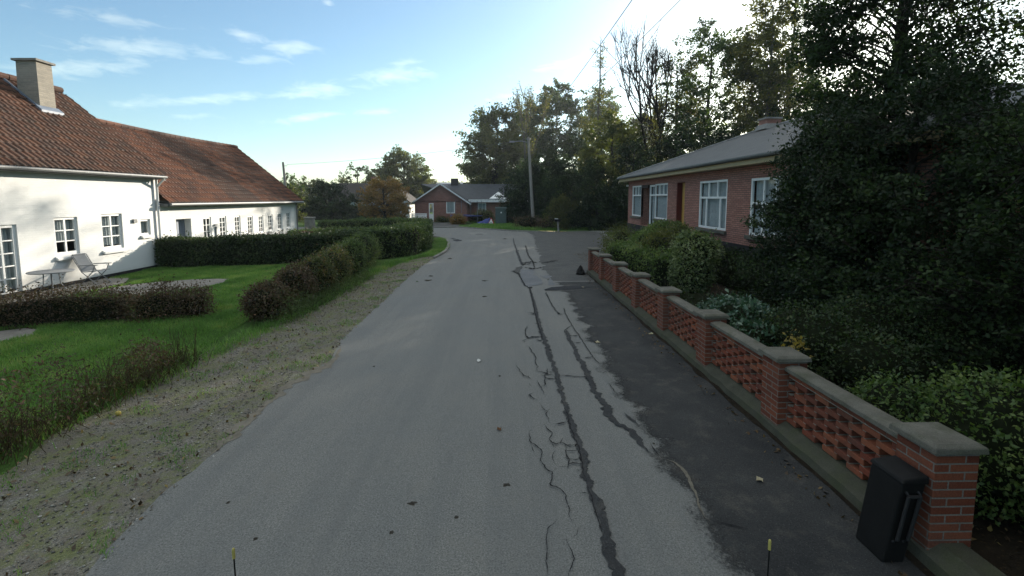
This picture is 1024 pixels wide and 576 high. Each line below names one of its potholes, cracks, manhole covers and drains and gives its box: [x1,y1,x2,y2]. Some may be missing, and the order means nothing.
crack [513,245,603,576]
